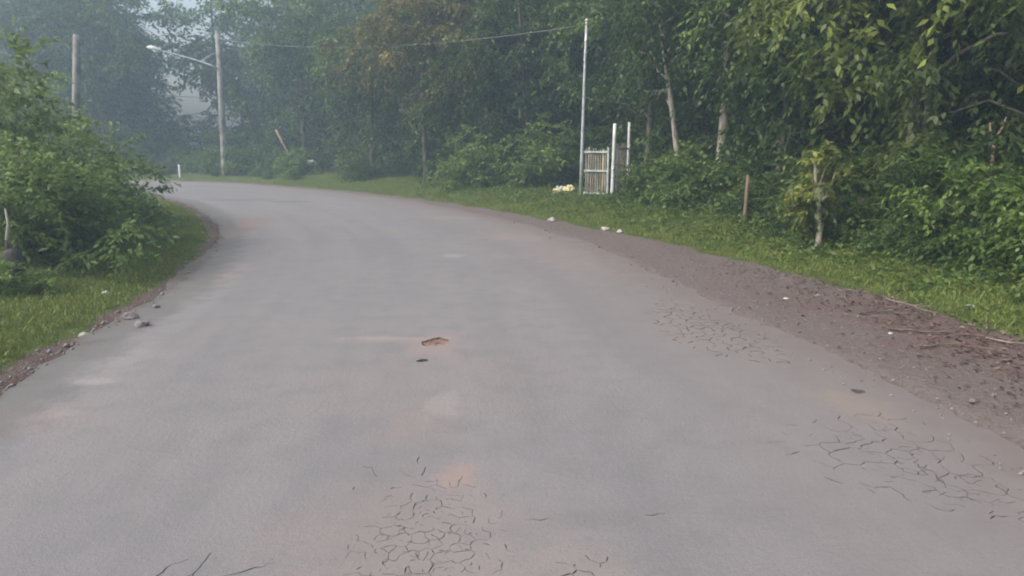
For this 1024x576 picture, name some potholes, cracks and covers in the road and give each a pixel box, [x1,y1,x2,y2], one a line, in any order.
crack [156,552,268,576]
crack [343,452,515,576]
crack [556,555,608,576]
crack [651,300,791,364]
crack [767,412,1024,522]
